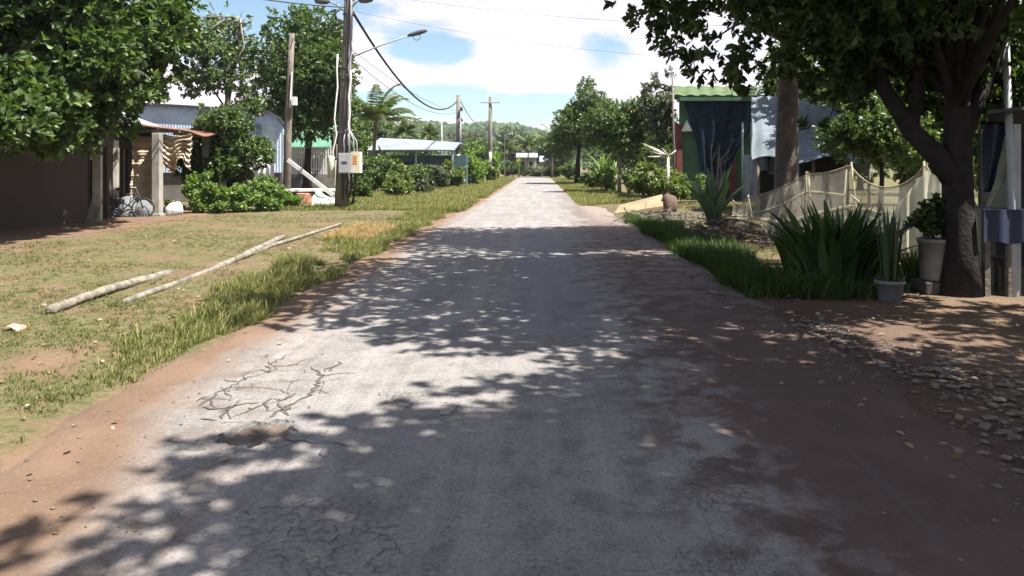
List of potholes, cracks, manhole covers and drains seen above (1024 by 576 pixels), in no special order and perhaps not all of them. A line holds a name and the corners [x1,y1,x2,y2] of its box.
crack [239,496,405,576]
pothole [186,411,322,459]
crack [675,534,783,576]
crack [196,353,349,420]
crack [682,456,769,519]
